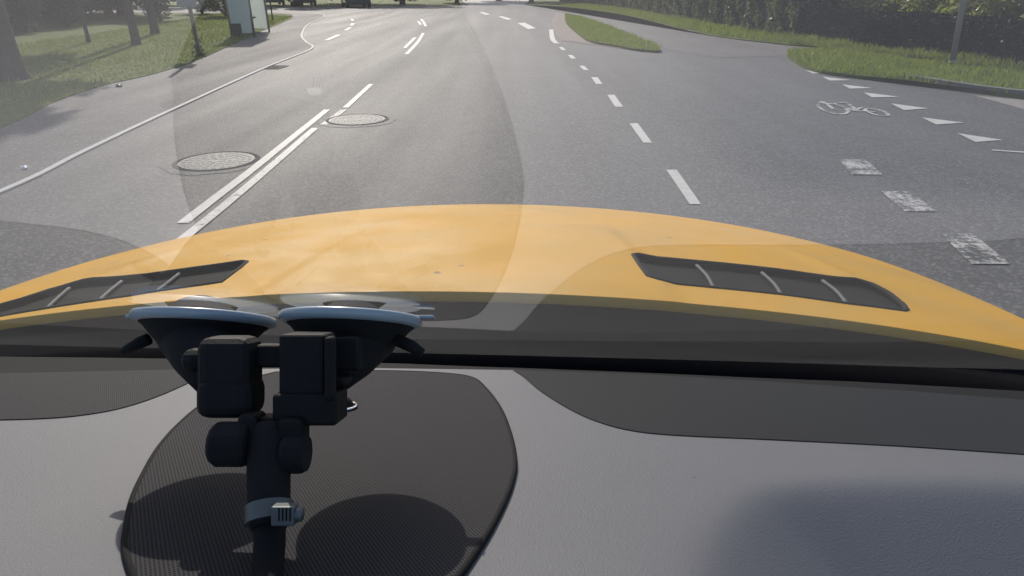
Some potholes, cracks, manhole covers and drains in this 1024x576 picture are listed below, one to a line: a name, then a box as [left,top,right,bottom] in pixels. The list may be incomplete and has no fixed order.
manhole cover [316,113,397,128]
manhole cover [158,149,271,176]
